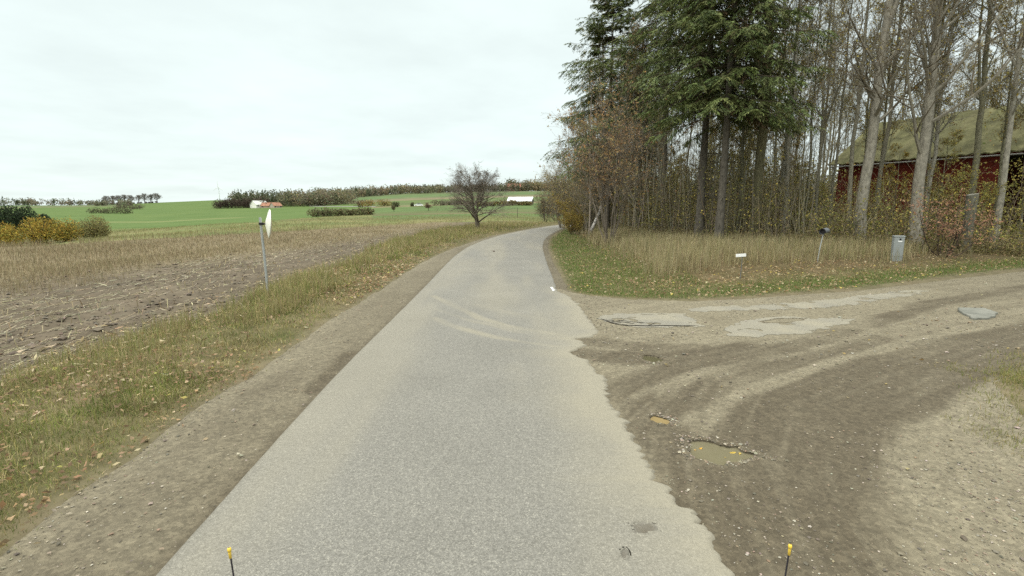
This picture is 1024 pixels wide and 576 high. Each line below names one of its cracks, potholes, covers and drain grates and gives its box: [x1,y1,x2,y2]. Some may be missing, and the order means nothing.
pothole [648,414,674,426]
pothole [640,354,666,363]
pothole [628,519,662,535]
pothole [684,437,764,468]
